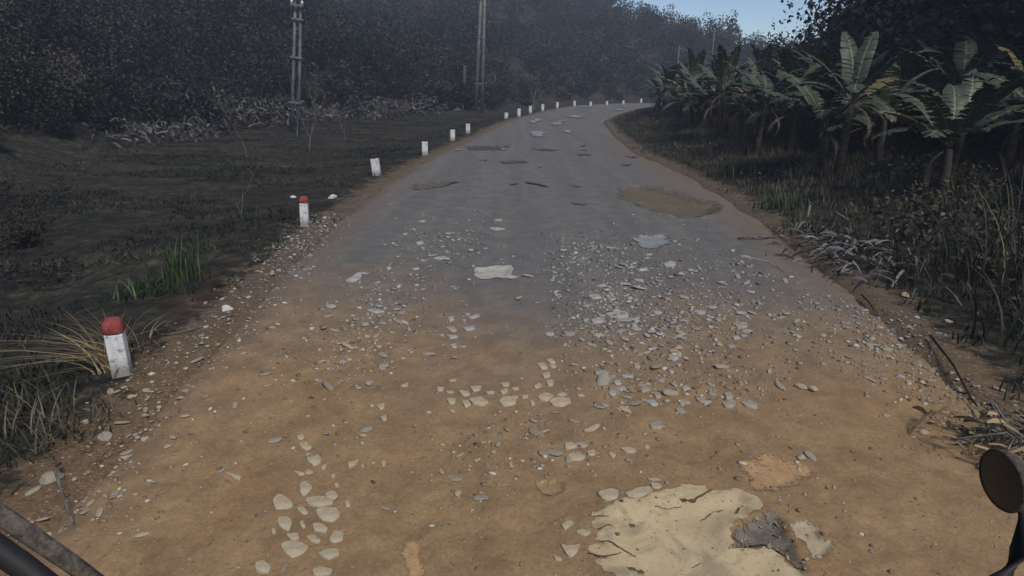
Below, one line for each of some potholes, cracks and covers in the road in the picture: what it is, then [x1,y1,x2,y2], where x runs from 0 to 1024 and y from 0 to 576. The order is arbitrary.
pothole [617,185,721,218]
pothole [411,180,454,190]
crack [655,489,740,521]
